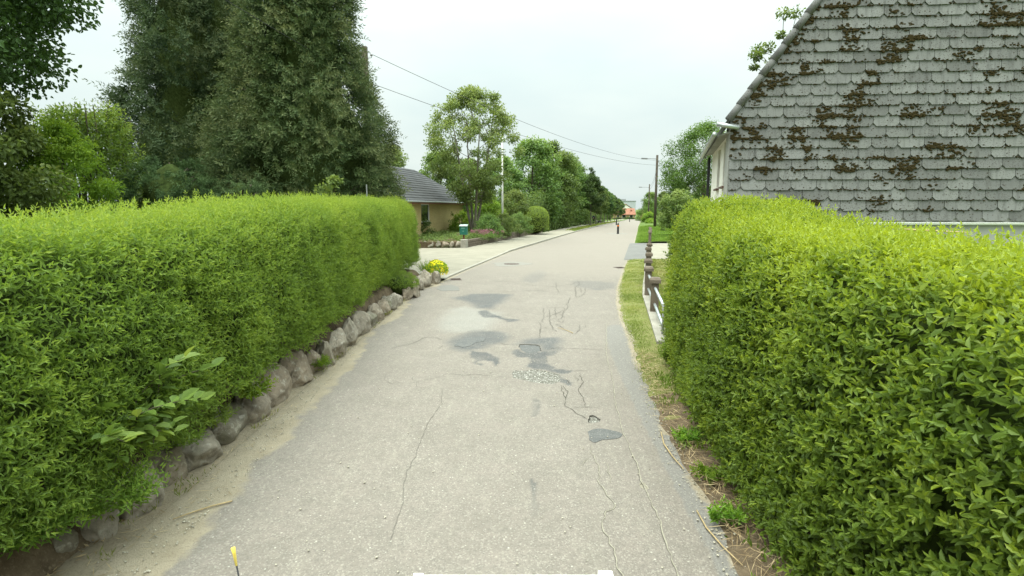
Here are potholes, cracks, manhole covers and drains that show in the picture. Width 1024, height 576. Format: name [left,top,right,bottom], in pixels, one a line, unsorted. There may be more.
pothole [501,367,572,388]
crack [583,447,624,576]
crack [538,283,600,417]
crack [384,372,494,543]
pothole [576,411,613,428]
